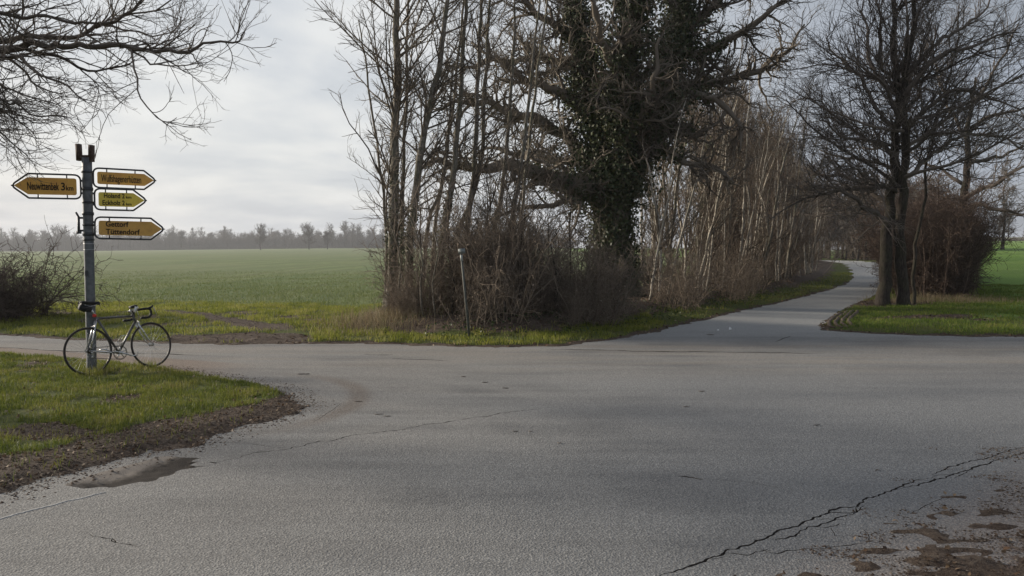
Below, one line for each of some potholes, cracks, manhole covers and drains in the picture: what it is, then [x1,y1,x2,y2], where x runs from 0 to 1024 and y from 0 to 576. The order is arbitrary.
crack [210,409,532,463]
crack [661,448,1022,575]
